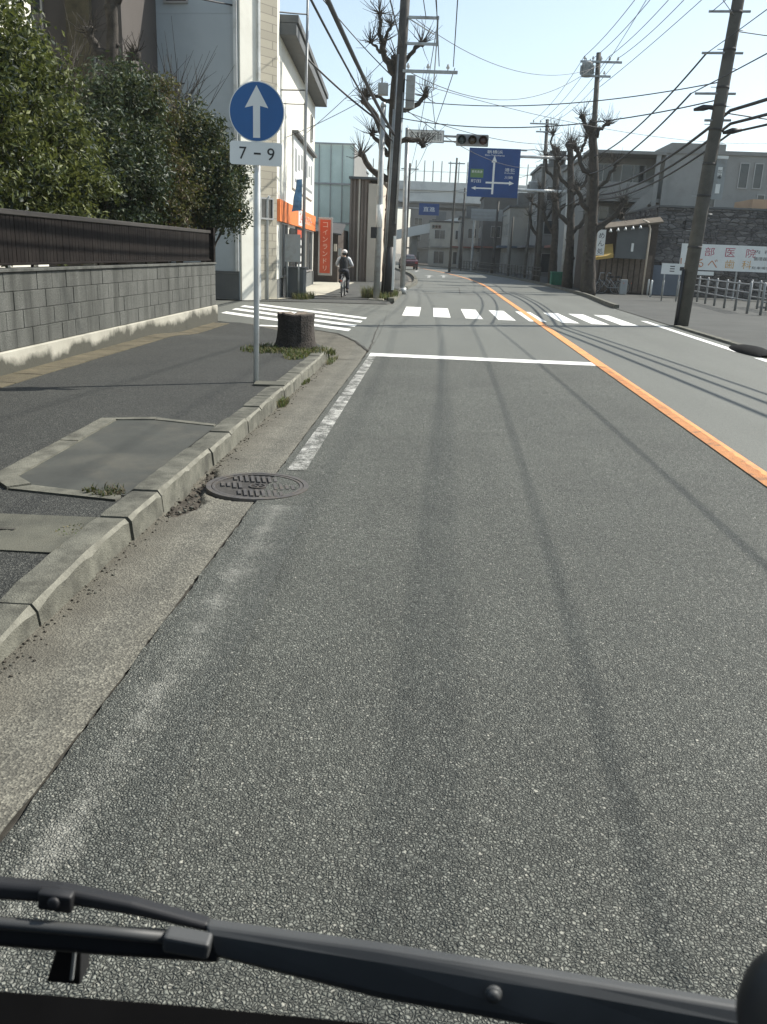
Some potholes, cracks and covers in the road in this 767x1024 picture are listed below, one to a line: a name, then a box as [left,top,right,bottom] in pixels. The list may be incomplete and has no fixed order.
manhole cover [206,472,309,504]
